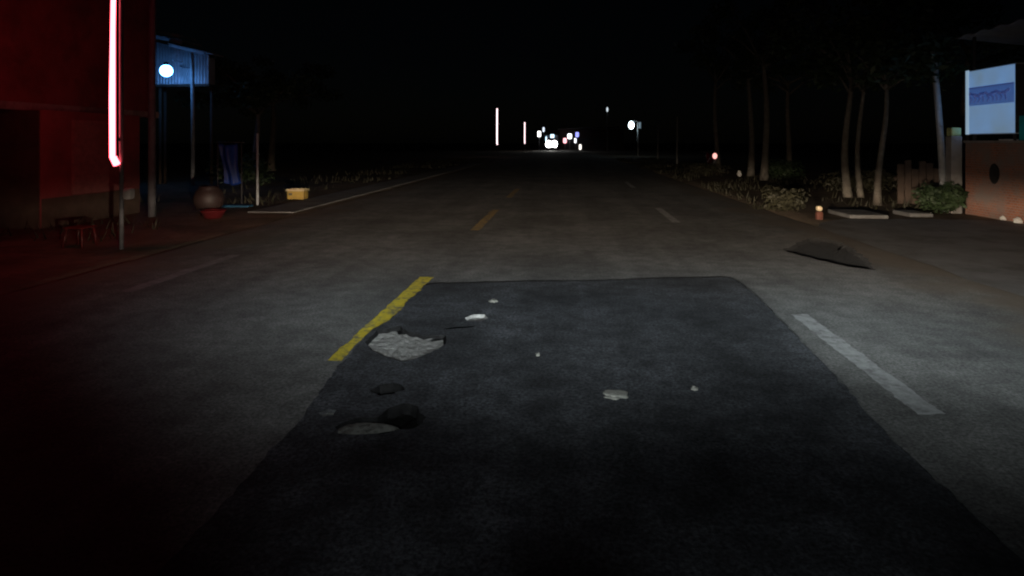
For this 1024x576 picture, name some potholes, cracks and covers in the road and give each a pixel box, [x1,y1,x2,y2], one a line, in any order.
pothole [365,326,446,362]
pothole [370,383,405,396]
pothole [335,403,426,434]
pothole [465,314,487,322]
